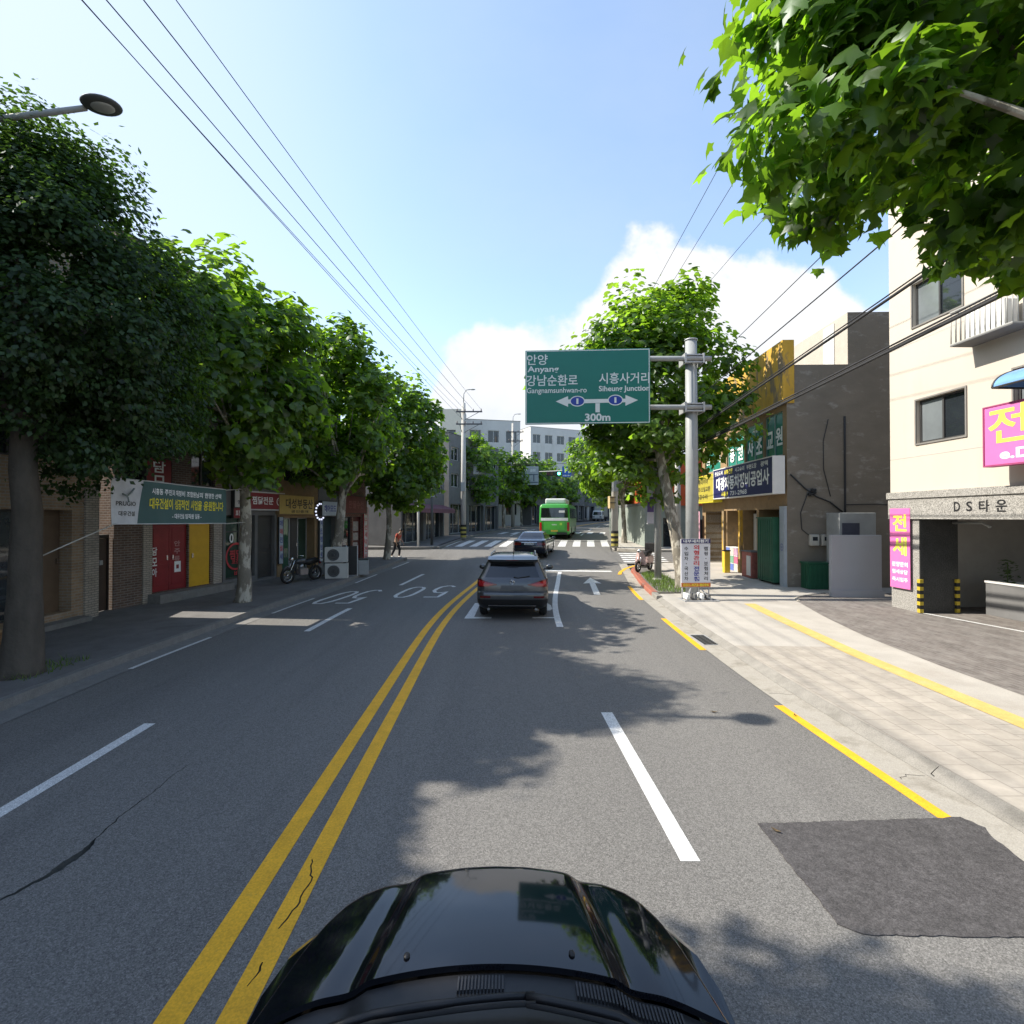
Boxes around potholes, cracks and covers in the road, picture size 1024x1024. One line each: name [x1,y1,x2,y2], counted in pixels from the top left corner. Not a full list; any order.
crack [247,859,313,986]
crack [0,766,186,900]
drain grate [689,635,718,645]
